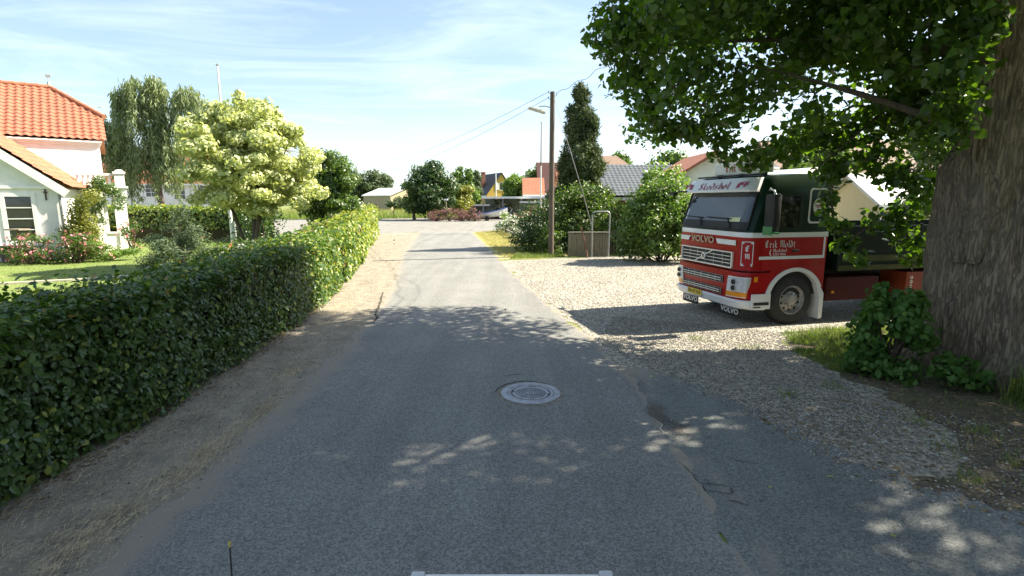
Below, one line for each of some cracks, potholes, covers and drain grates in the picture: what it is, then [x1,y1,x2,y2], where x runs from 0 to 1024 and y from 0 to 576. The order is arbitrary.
manhole cover [498,382,564,406]
crack [678,461,746,505]
